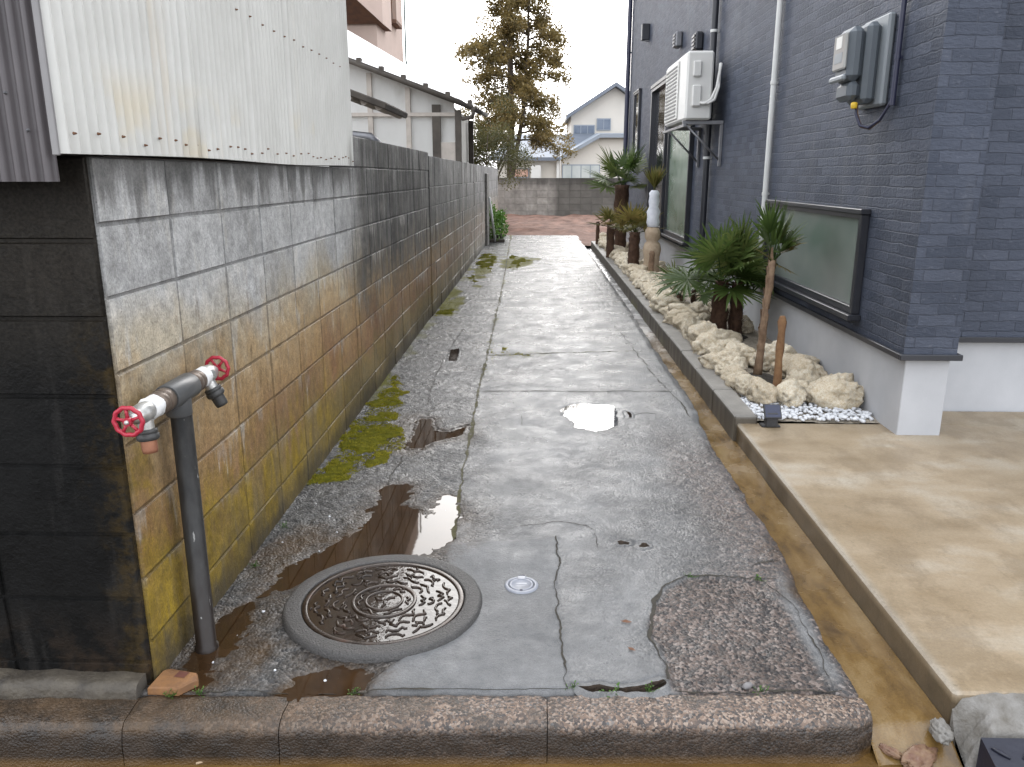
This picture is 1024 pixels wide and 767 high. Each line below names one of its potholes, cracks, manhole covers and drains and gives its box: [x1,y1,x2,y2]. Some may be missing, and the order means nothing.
manhole cover [282,555,482,664]
crack [451,237,690,540]
manhole cover [504,575,538,594]
crack [189,521,842,695]
pothole [570,676,675,699]
pothole [404,418,471,451]
